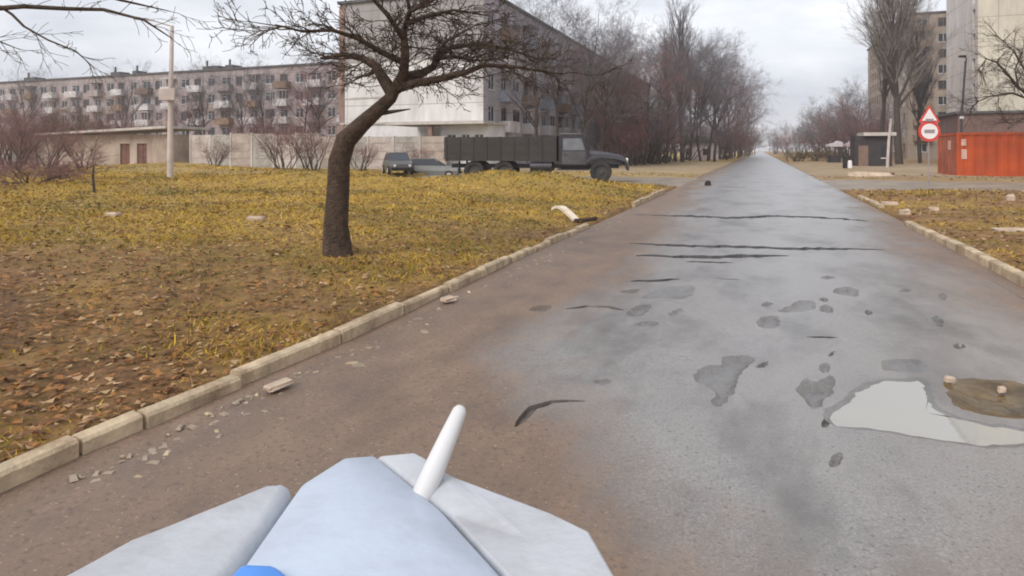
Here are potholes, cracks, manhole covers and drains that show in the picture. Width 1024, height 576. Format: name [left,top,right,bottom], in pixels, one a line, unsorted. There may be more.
pothole [693,355,756,407]
pothole [756,316,780,329]
pothole [796,374,835,409]
pothole [833,287,859,297]
pothole [828,452,843,468]
crack [630,243,882,282]
pothole [778,300,816,313]
crack [514,400,583,427]
pothole [822,377,1024,449]
